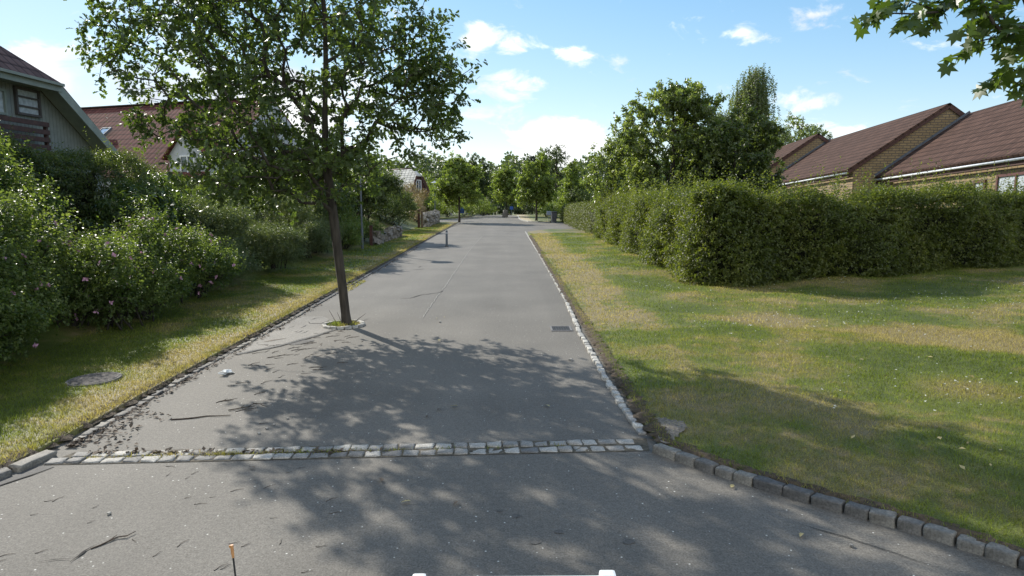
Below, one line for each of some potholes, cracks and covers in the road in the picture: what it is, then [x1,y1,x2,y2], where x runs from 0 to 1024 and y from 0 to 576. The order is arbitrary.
manhole cover [65,372,123,387]
